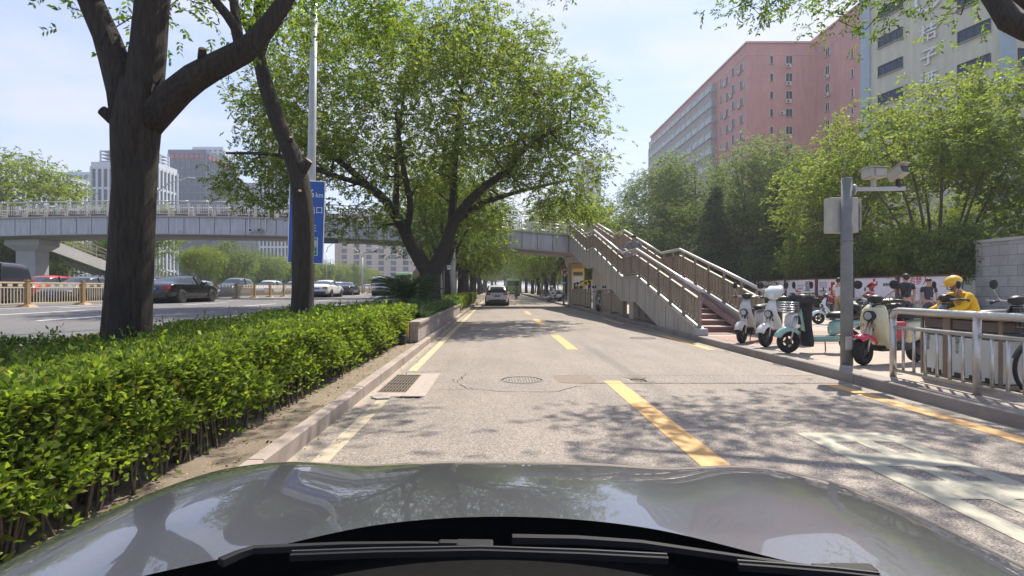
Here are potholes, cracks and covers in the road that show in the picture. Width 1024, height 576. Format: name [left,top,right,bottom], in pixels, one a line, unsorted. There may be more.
drain grate [371,374,440,398]
crack [428,370,576,392]
manhole cover [498,376,547,384]
